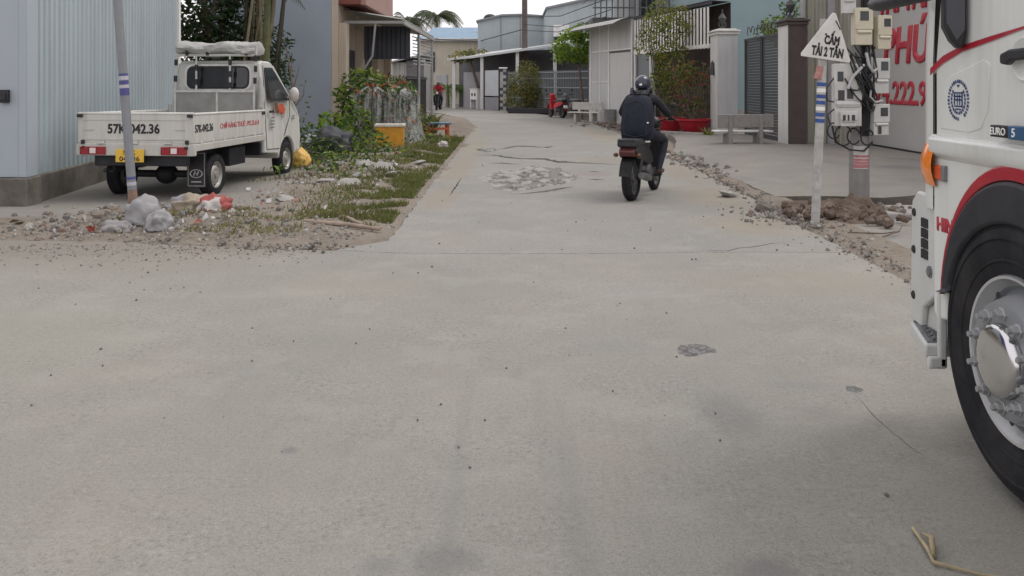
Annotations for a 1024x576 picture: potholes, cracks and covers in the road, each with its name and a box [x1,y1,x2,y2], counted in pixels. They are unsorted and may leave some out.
pothole [677,343,717,357]
pothole [477,165,583,191]
crack [855,394,945,469]
crack [451,145,620,194]
